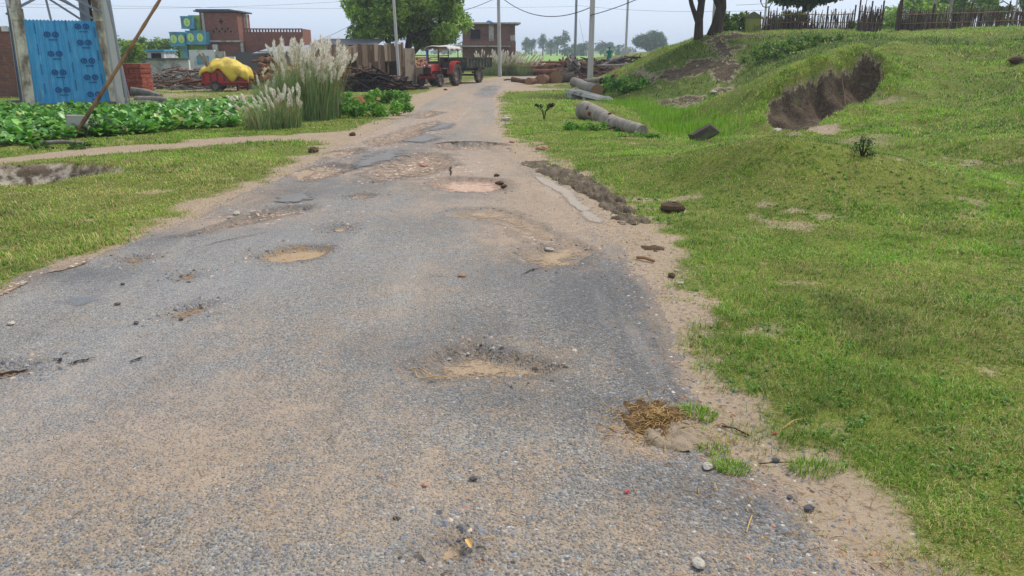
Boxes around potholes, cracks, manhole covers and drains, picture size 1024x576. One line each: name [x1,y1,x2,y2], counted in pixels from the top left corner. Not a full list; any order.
pothole [257,245,331,263]
pothole [426,346,535,379]
pothole [432,175,515,192]
pothole [526,239,586,268]
crack [0,369,28,379]
